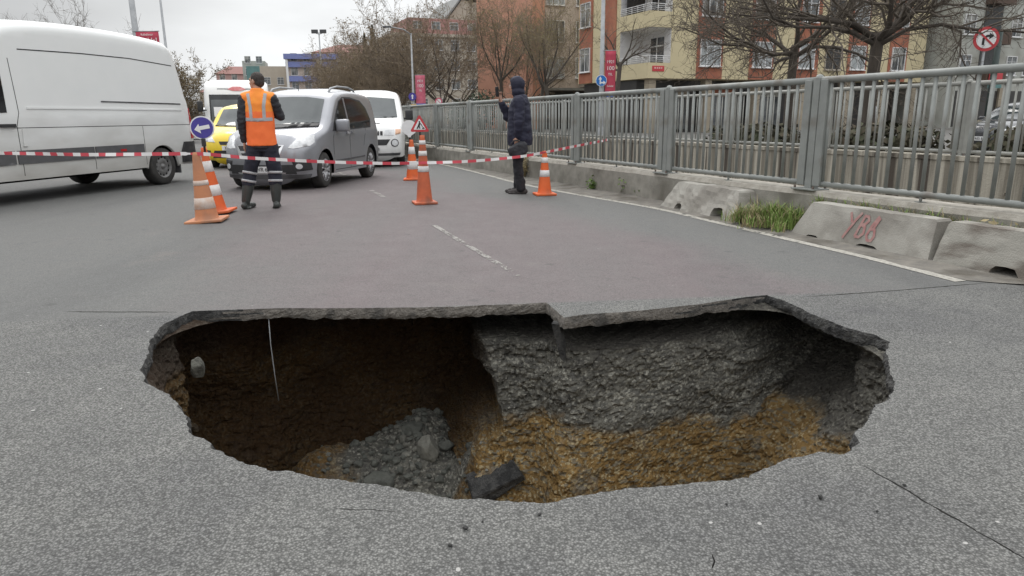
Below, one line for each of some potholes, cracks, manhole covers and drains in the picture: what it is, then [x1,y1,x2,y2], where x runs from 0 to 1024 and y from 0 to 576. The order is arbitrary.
pothole [140,295,895,503]
crack [856,462,1024,558]
